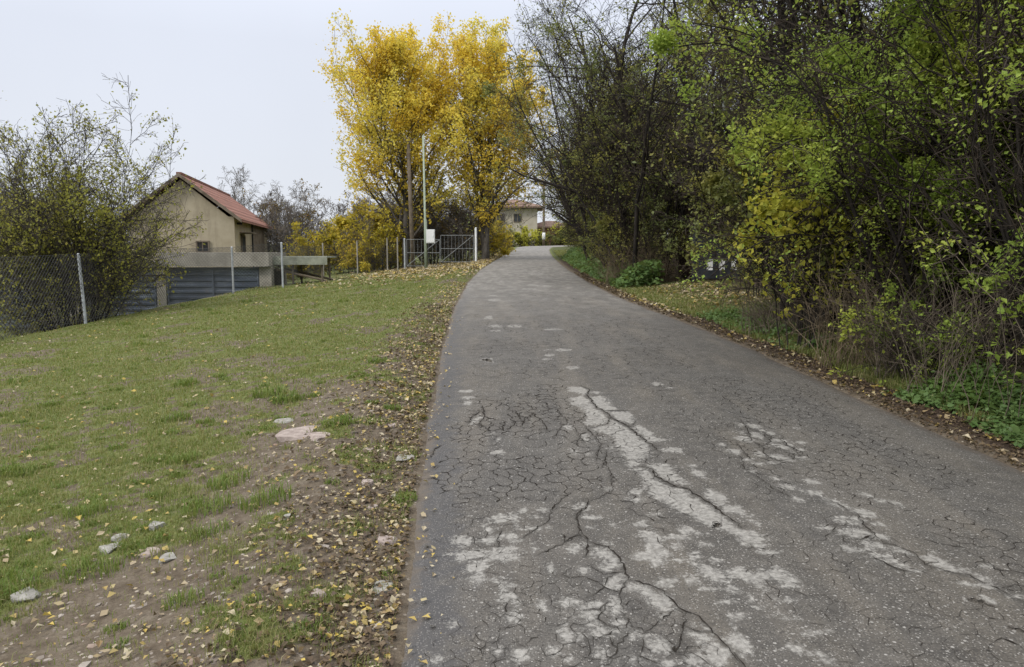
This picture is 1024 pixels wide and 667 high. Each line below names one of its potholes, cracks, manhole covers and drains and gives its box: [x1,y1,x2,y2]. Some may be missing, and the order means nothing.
crack [660,376,1024,667]
crack [420,293,746,667]
